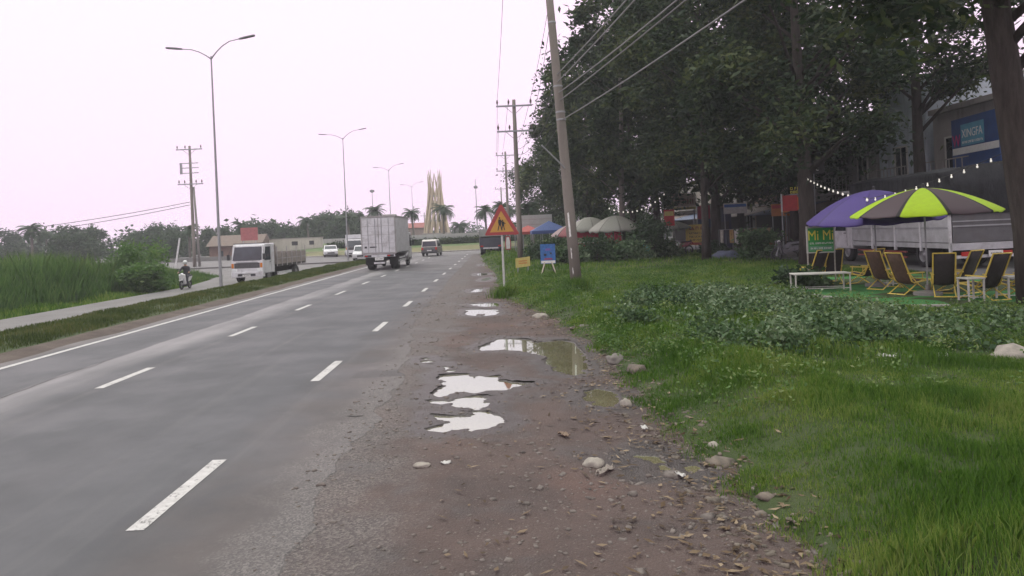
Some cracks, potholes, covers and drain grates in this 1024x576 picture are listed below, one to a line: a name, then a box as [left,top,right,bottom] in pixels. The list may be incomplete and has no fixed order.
pothole [582,388,620,407]
pothole [424,410,507,432]
pothole [430,373,533,398]
pothole [425,395,499,410]
pothole [478,338,591,375]
